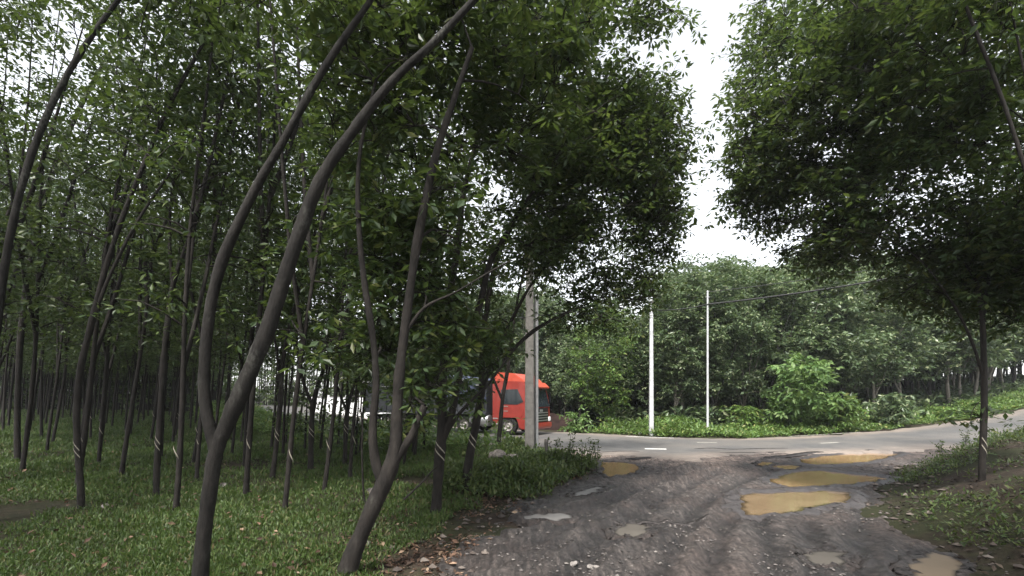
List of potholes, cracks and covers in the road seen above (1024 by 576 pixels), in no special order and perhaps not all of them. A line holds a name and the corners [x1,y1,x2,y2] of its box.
pothole [597,459,645,478]
pothole [789,449,911,467]
pothole [565,485,609,497]
pothole [601,522,661,540]
pothole [761,468,904,489]
pothole [516,507,580,526]
pothole [787,544,862,573]
pothole [889,549,977,576]
pothole [722,486,869,522]
pothole [762,463,810,471]
